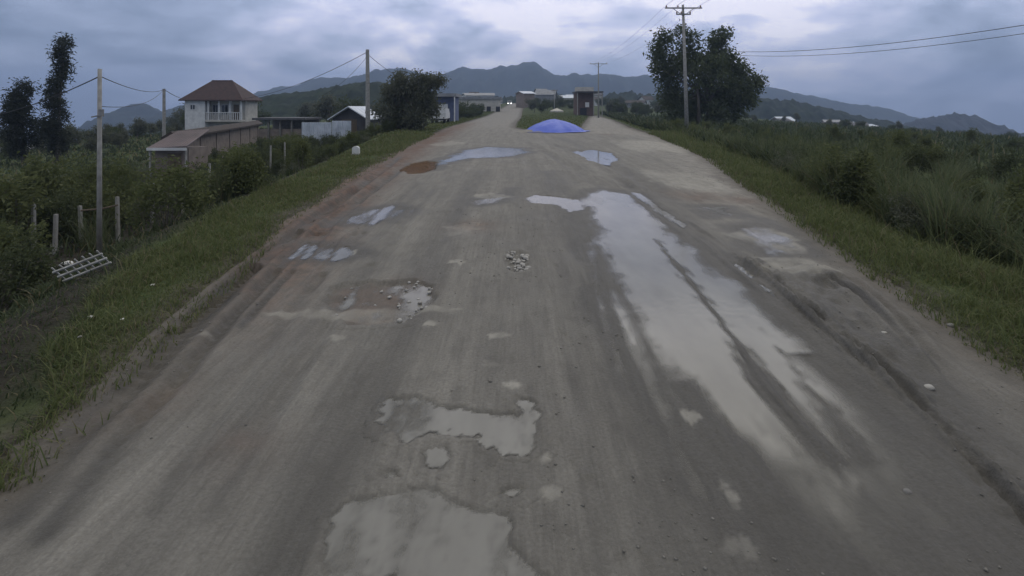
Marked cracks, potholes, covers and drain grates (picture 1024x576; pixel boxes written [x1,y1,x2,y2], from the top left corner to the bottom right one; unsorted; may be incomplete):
pothole [519,194,592,214]
pothole [298,475,562,576]
pothole [396,160,444,175]
pothole [567,148,626,167]
pothole [362,387,559,467]
pothole [310,276,446,331]
